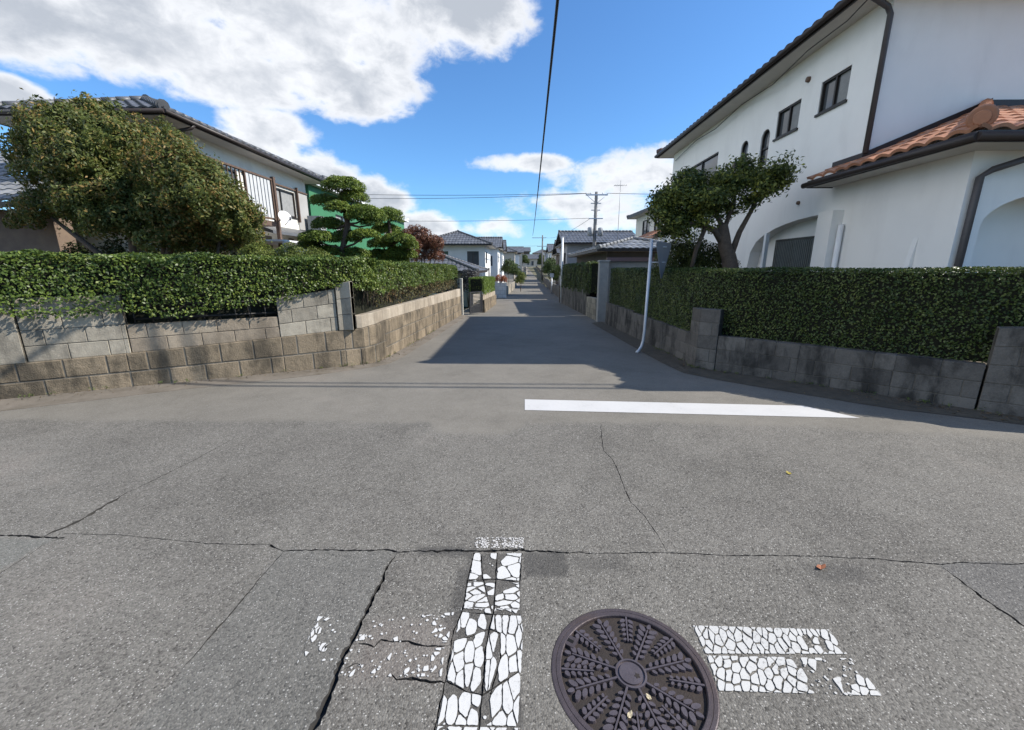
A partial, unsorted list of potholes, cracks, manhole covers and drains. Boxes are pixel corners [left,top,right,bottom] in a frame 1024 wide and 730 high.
manhole cover [551,609,720,730]
crack [1,442,227,573]
crack [601,430,667,551]
crack [308,554,522,730]
crack [941,566,1024,626]
crack [182,556,280,669]
